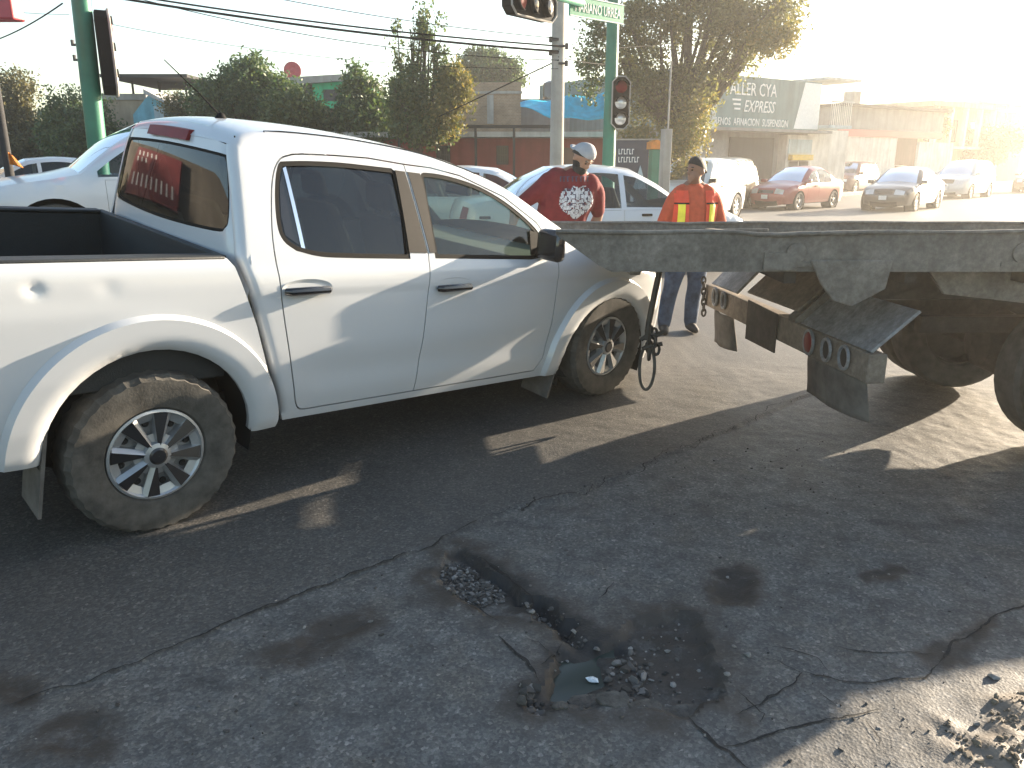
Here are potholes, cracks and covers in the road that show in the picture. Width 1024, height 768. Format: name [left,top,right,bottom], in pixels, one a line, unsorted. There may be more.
pothole [516,595,732,721]
pothole [428,545,531,621]
crack [688,605,1024,768]
